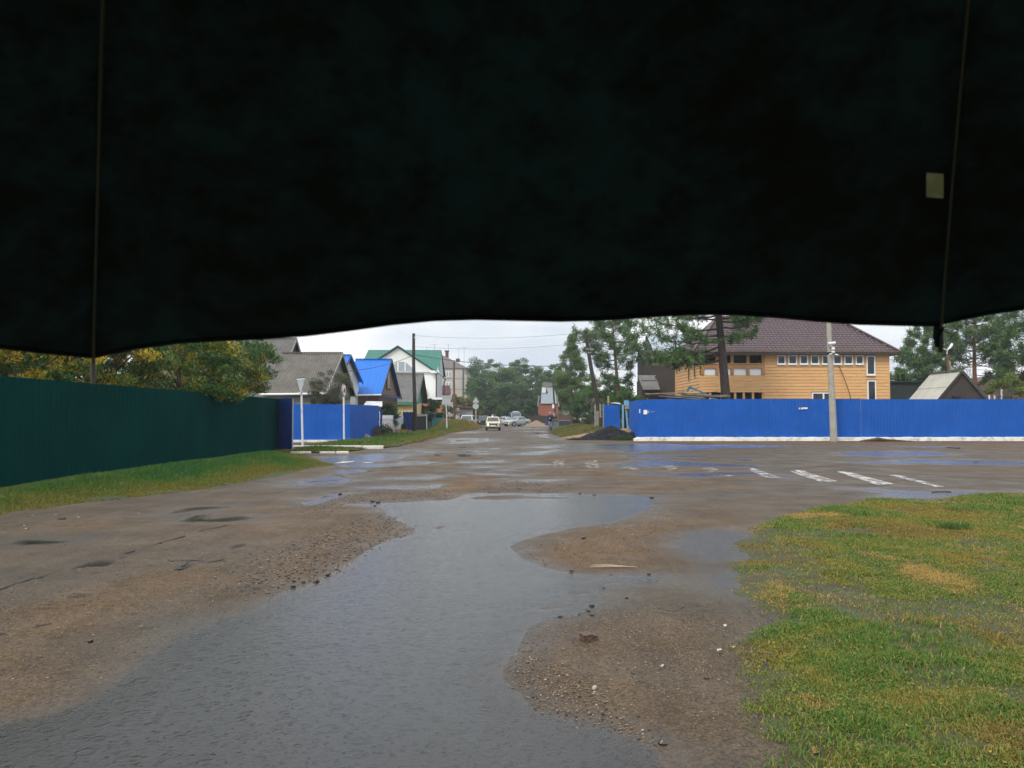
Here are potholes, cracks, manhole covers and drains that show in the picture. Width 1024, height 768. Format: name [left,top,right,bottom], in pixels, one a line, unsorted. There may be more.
crack [155,524,237,569]
pothole [64,558,117,570]
